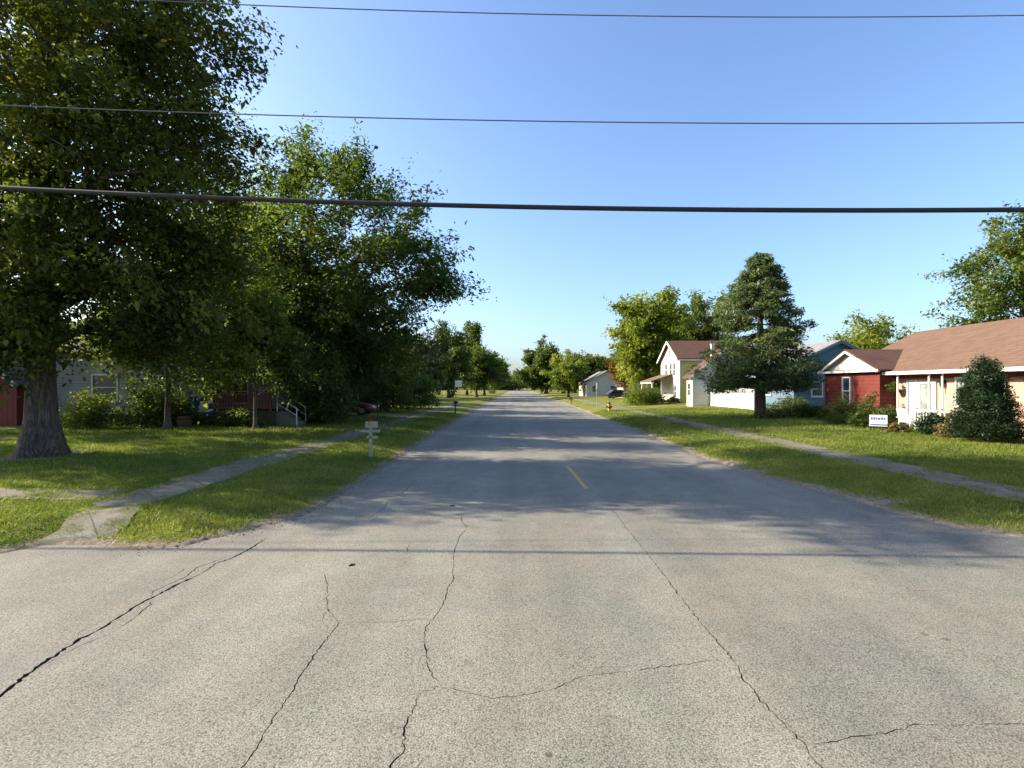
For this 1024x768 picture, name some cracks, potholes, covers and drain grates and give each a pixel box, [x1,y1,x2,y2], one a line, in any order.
crack [0,539,265,697]
crack [612,510,1010,768]
crack [241,516,715,768]
